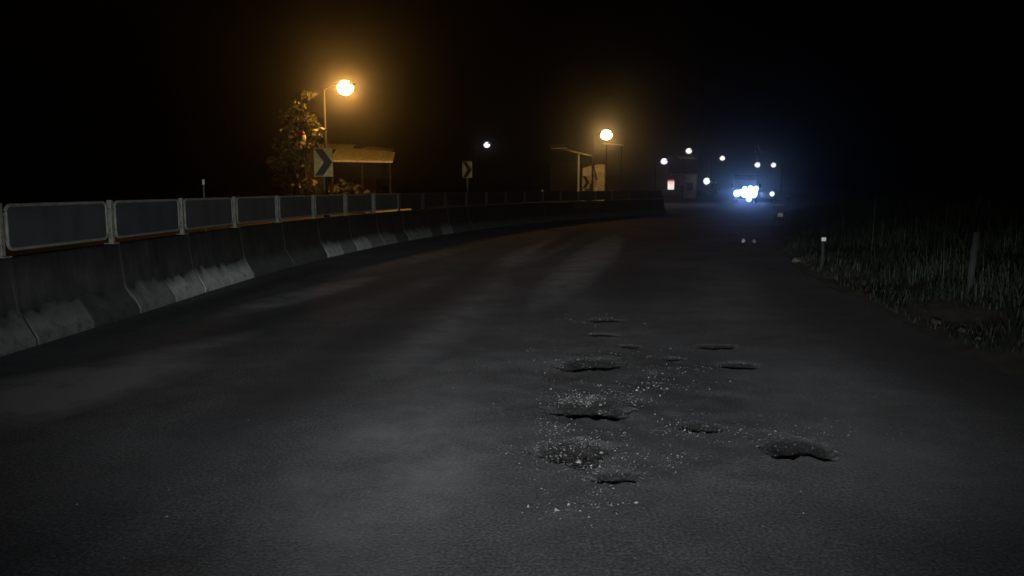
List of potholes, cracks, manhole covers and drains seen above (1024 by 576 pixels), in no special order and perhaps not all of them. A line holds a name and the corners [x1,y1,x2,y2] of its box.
pothole [669,420,728,434]
pothole [712,360,764,370]
pothole [537,393,639,422]
pothole [528,436,620,470]
pothole [549,354,625,373]
pothole [748,430,843,462]
pothole [585,467,643,484]
